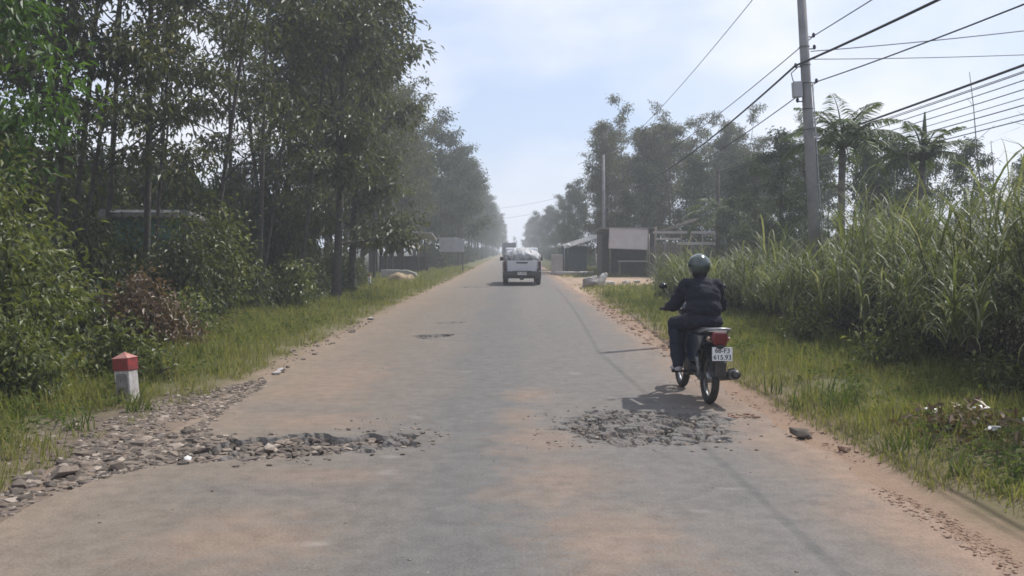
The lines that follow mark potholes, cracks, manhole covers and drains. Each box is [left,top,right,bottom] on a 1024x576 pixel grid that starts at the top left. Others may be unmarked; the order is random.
pothole [184,433,421,463]
pothole [543,409,740,448]
